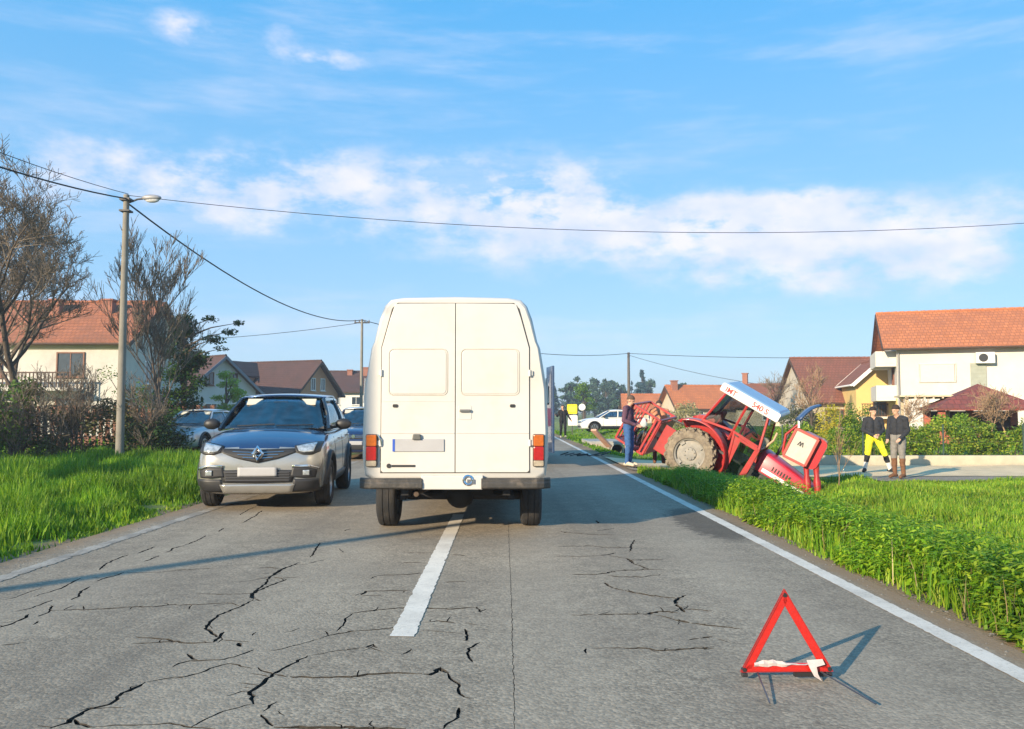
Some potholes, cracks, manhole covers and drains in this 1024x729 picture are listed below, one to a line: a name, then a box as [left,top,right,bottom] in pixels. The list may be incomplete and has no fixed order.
crack [558,521,740,653]
crack [0,528,486,729]
